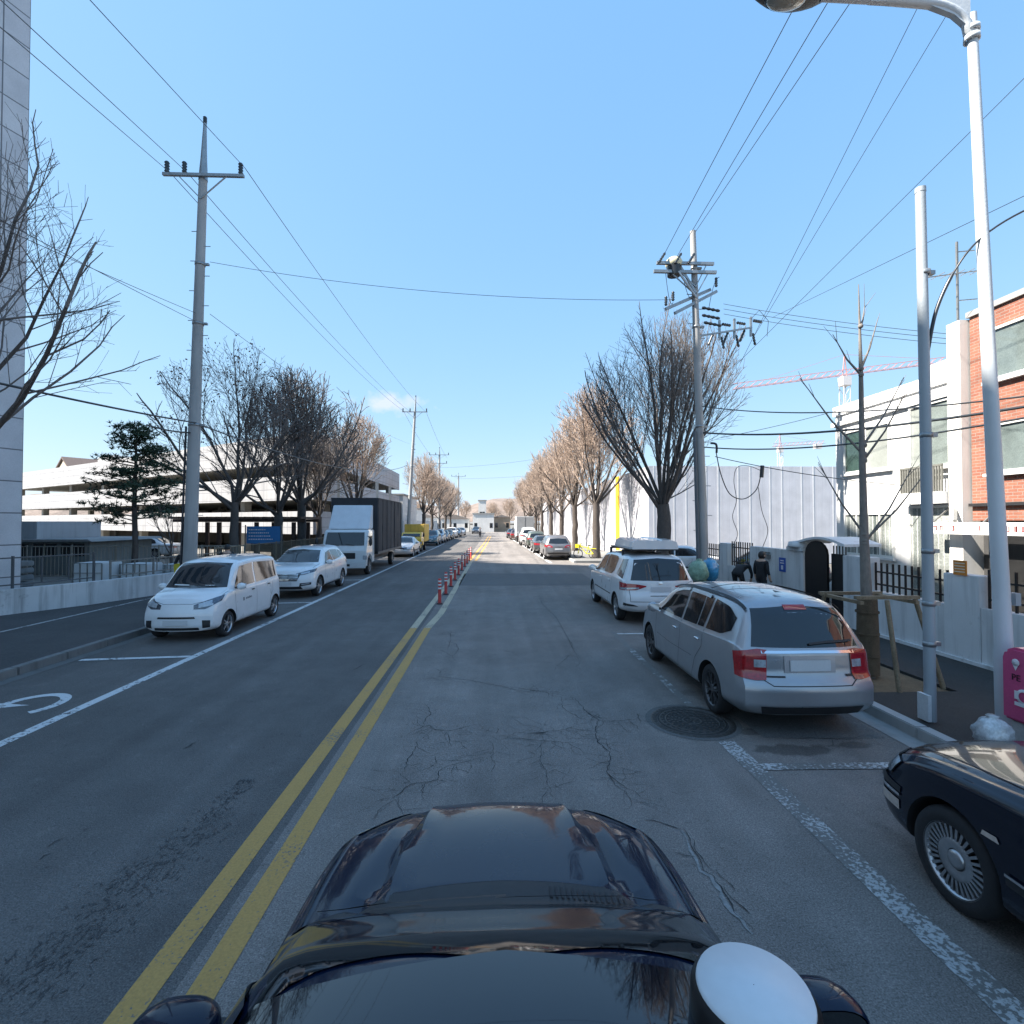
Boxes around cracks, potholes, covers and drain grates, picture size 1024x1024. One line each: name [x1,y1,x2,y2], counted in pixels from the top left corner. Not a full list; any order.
crack [424,610,571,701]
crack [327,698,669,820]
crack [533,595,584,670]
manhole cover [650,706,737,738]
crack [653,820,753,934]
